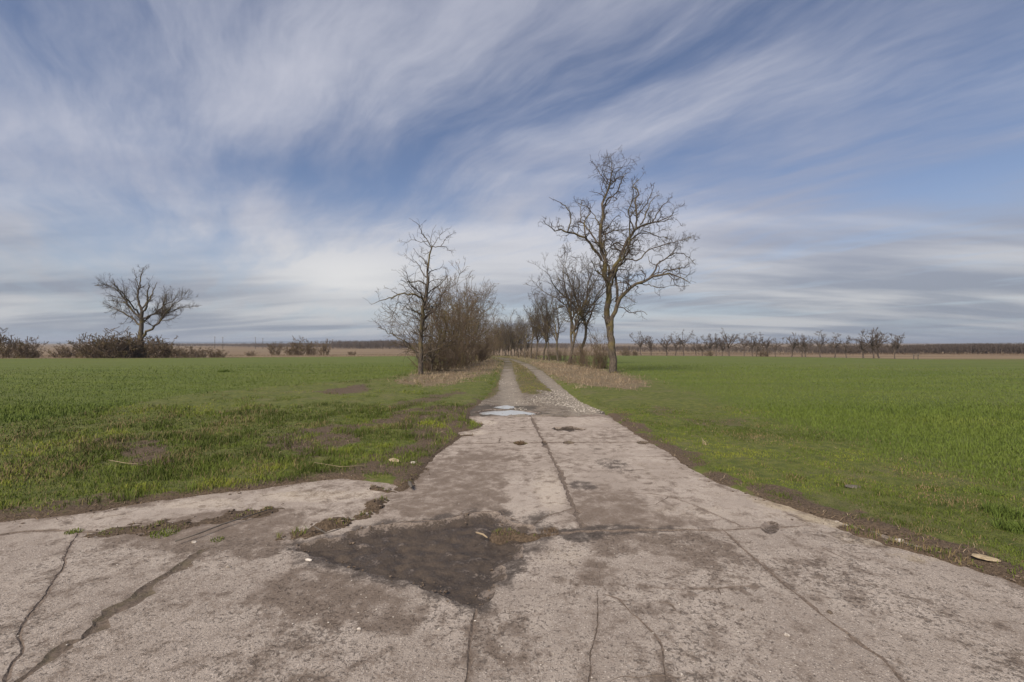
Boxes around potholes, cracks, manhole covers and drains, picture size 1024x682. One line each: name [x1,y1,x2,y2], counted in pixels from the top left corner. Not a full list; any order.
crack [588,575,749,682]
pothole [760,521,781,535]
crack [2,533,211,682]
